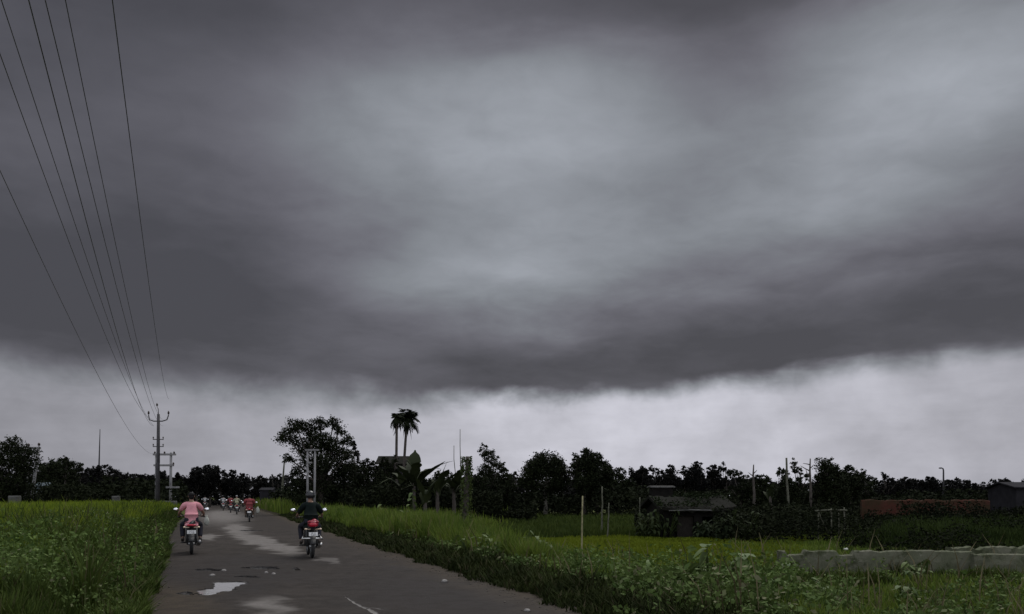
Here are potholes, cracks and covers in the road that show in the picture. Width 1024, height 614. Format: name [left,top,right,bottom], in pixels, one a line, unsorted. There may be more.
pothole [194,581,249,596]
